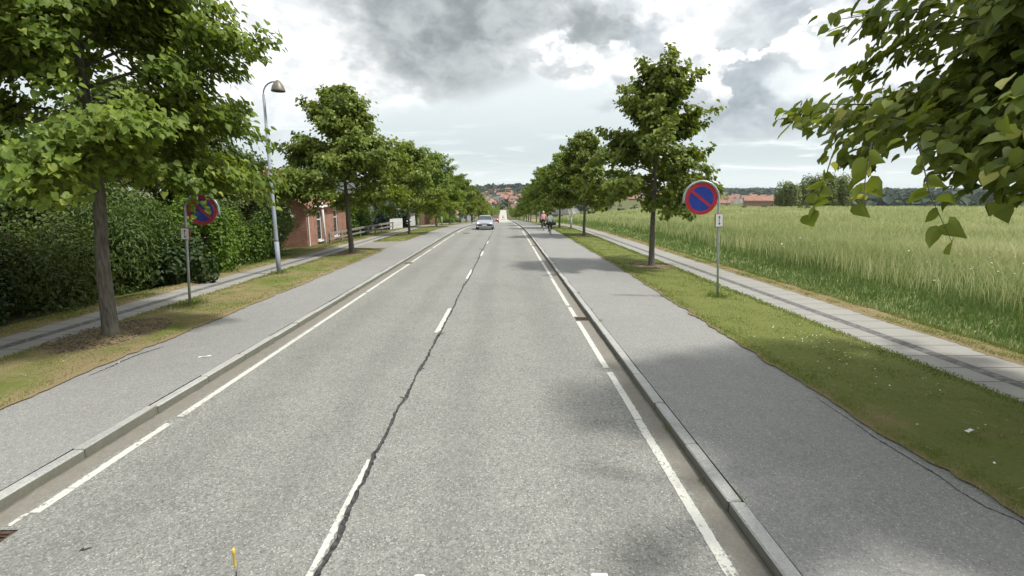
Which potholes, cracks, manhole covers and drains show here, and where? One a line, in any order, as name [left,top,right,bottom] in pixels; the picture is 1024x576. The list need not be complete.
crack [89,346,164,376]
